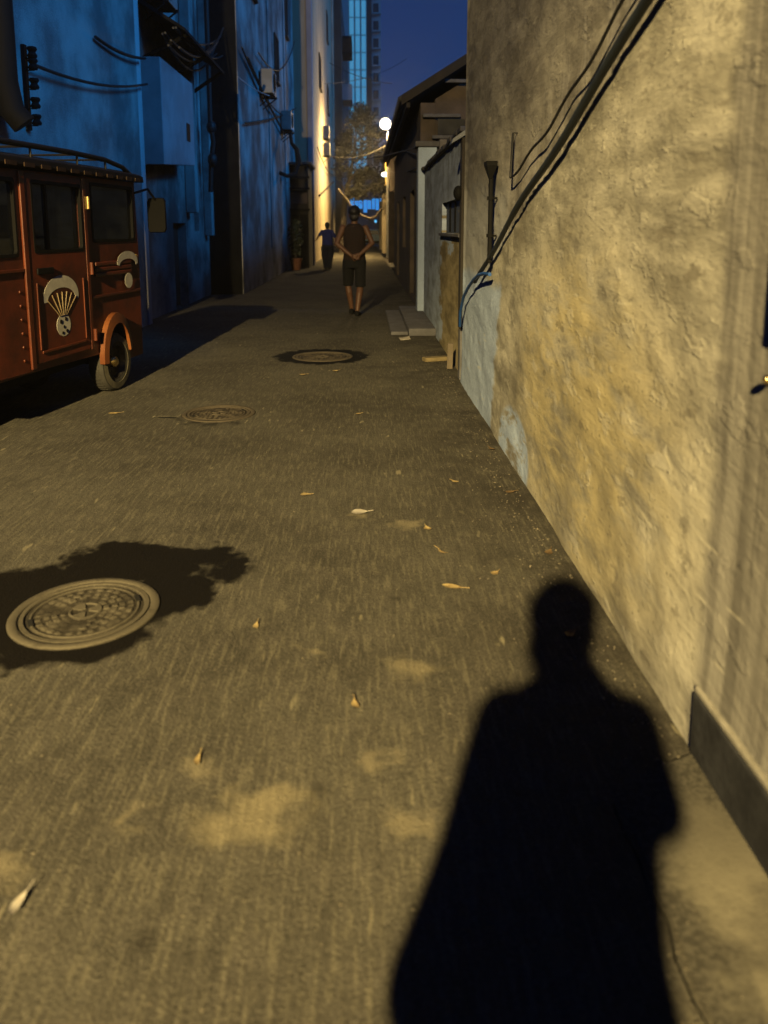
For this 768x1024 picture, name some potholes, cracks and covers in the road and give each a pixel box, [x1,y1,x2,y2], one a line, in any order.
manhole cover [6,578,160,651]
manhole cover [292,351,353,362]
manhole cover [182,405,255,423]
